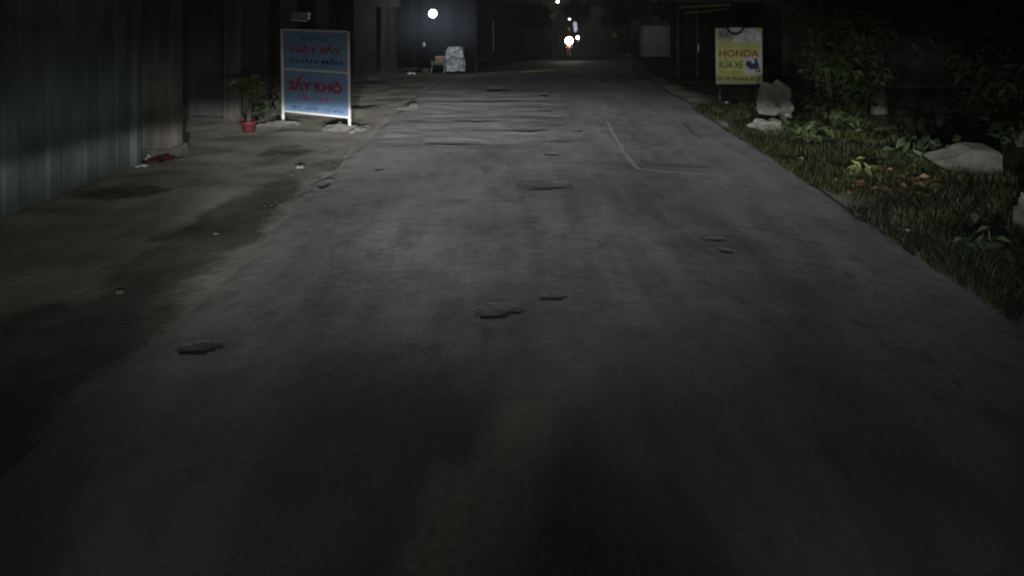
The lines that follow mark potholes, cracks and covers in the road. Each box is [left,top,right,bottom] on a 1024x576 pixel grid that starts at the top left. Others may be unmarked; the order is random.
pothole [463,298,533,325]
pothole [529,288,577,305]
pothole [310,179,338,191]
pothole [507,175,582,192]
pothole [711,245,743,256]
pothole [694,234,734,244]
pothole [160,336,232,360]
